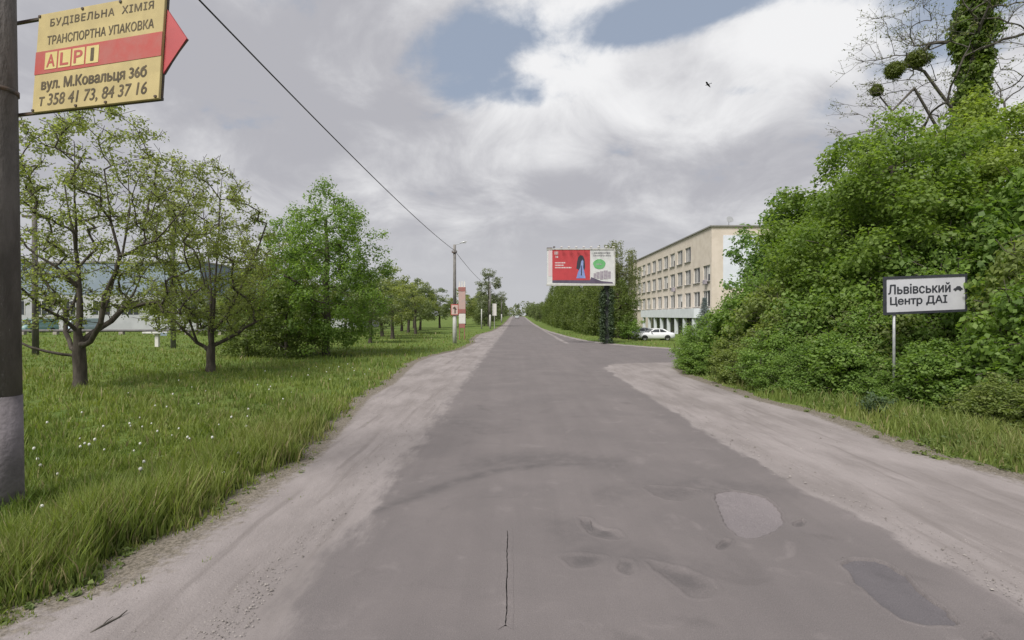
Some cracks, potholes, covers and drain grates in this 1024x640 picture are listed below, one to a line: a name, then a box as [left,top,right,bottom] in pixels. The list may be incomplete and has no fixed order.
pothole [611,556,641,578]
pothole [640,557,724,601]
pothole [574,515,628,541]
pothole [788,517,810,528]
pothole [712,536,736,551]
pothole [639,484,707,502]
pothole [555,550,612,571]
crack [498,528,514,629]
